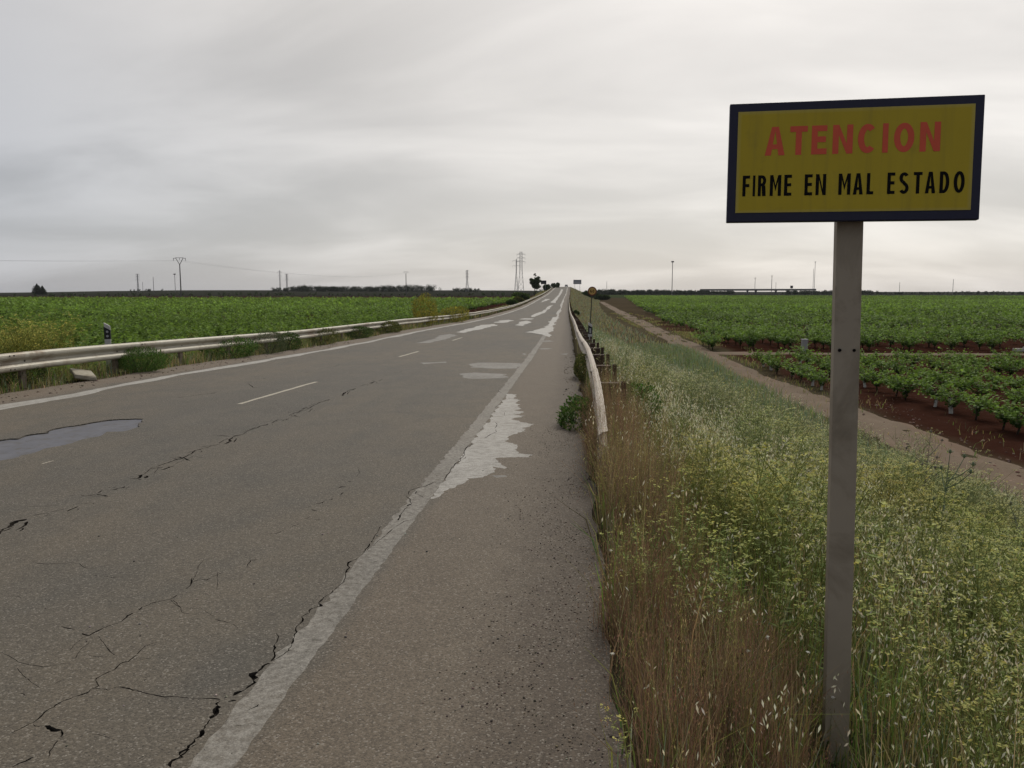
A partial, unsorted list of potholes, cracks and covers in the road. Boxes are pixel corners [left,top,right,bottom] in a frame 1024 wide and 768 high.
crack [2,390,505,767]
